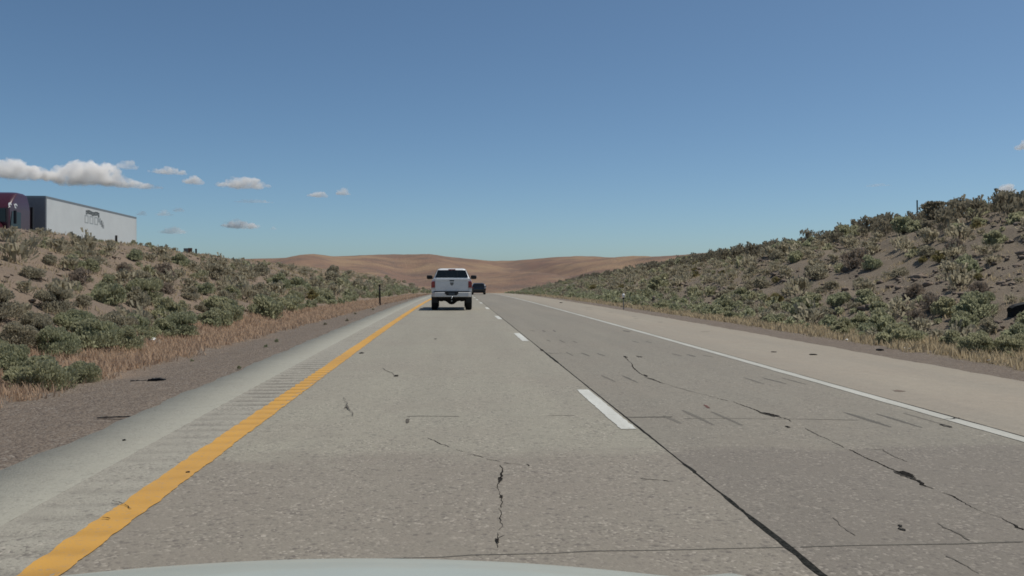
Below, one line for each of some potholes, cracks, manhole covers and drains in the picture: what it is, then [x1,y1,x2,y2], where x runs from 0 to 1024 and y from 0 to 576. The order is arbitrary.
crack [625,357,1024,530]
crack [428,438,530,548]
